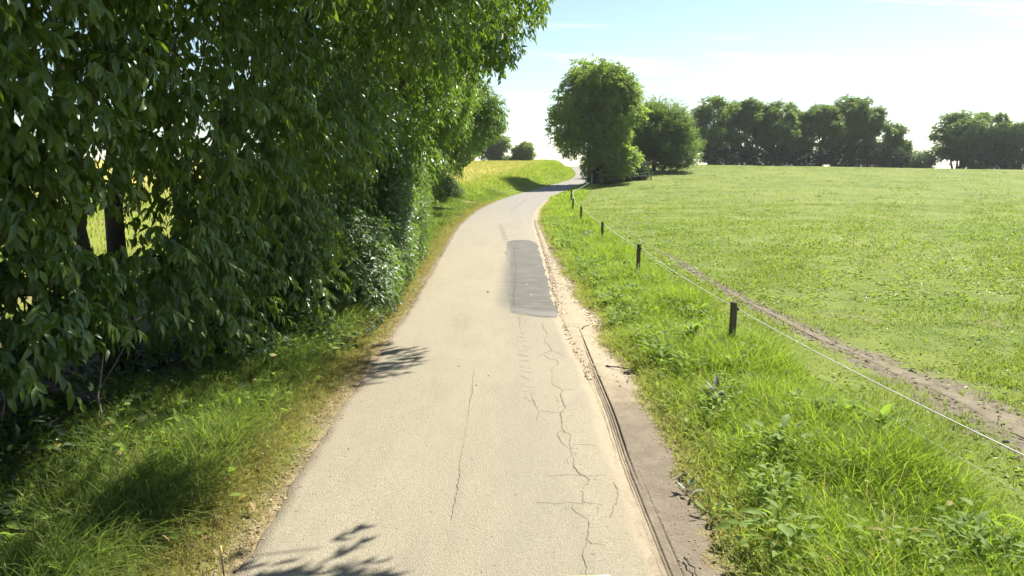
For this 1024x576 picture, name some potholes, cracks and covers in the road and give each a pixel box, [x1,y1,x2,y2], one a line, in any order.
crack [451,372,474,519]
crack [530,324,619,572]
